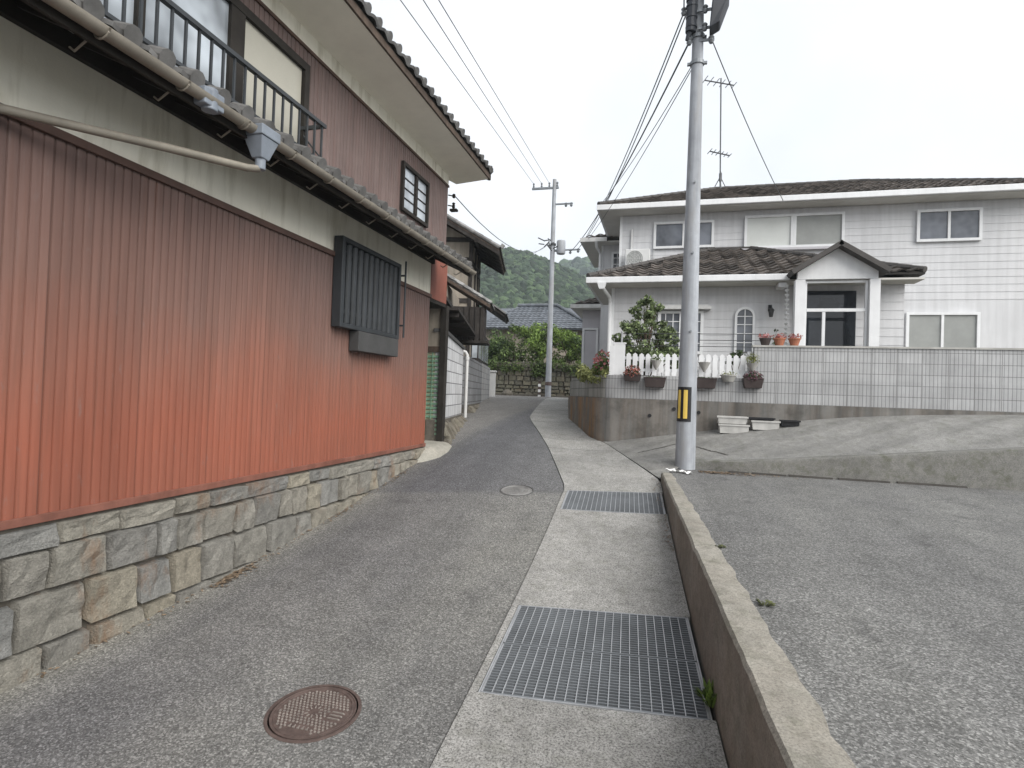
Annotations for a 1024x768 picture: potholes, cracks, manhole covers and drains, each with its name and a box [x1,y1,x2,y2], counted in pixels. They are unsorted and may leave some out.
drain grate [561,490,667,514]
drain grate [478,605,715,721]
manhole cover [499,485,534,496]
manhole cover [263,684,362,744]
